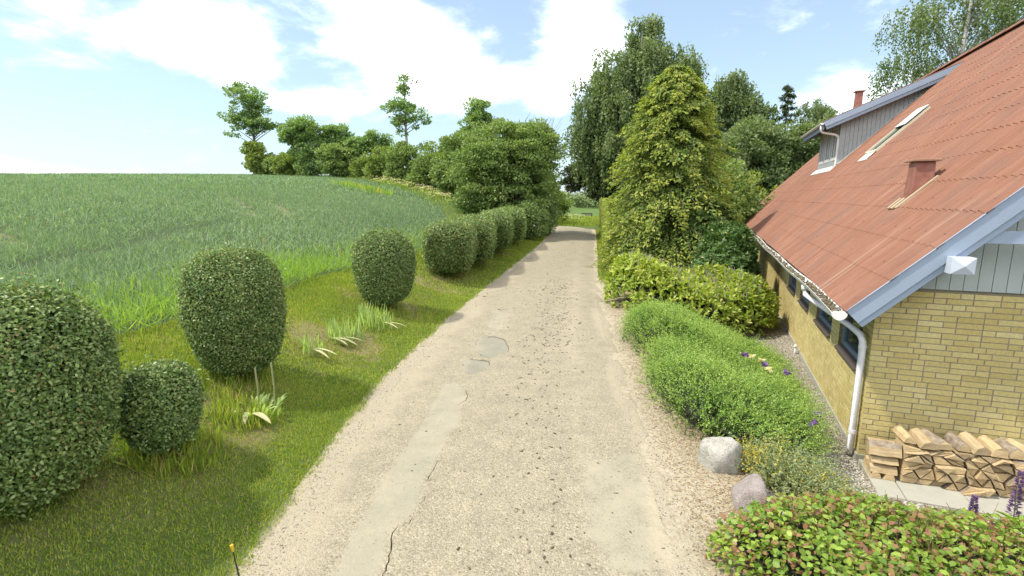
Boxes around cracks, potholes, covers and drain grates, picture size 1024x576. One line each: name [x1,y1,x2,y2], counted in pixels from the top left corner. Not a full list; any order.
crack [382,498,425,576]
